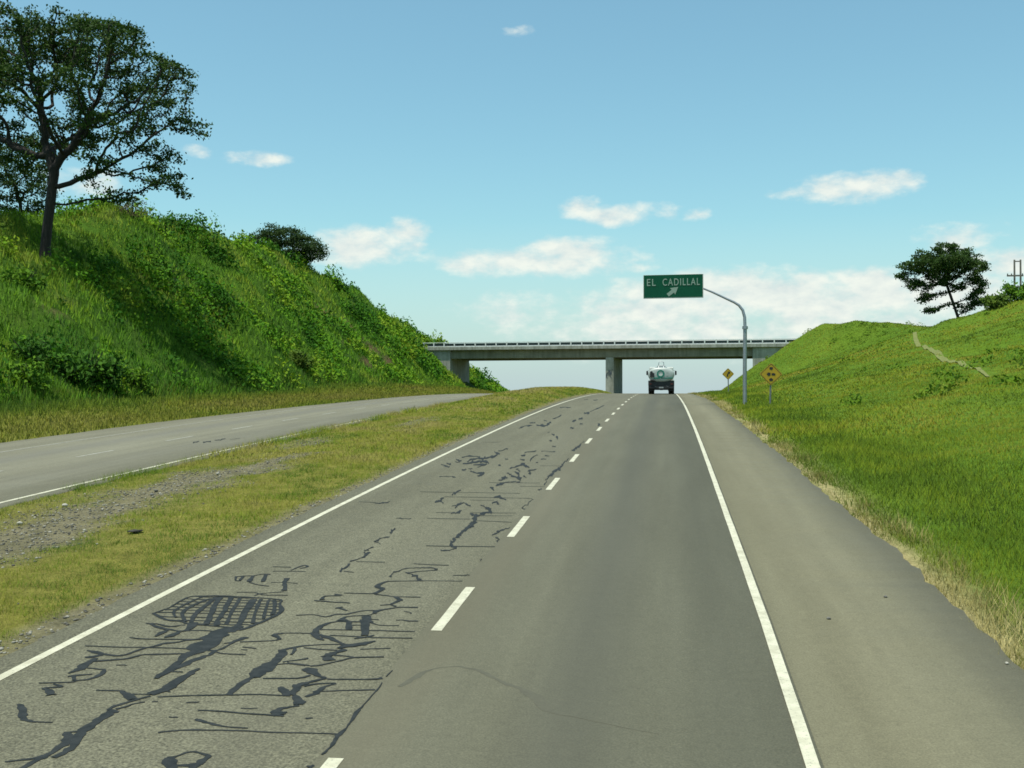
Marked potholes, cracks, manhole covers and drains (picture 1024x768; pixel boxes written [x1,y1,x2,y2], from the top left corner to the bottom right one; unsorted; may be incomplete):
crack [306,666,659,768]
